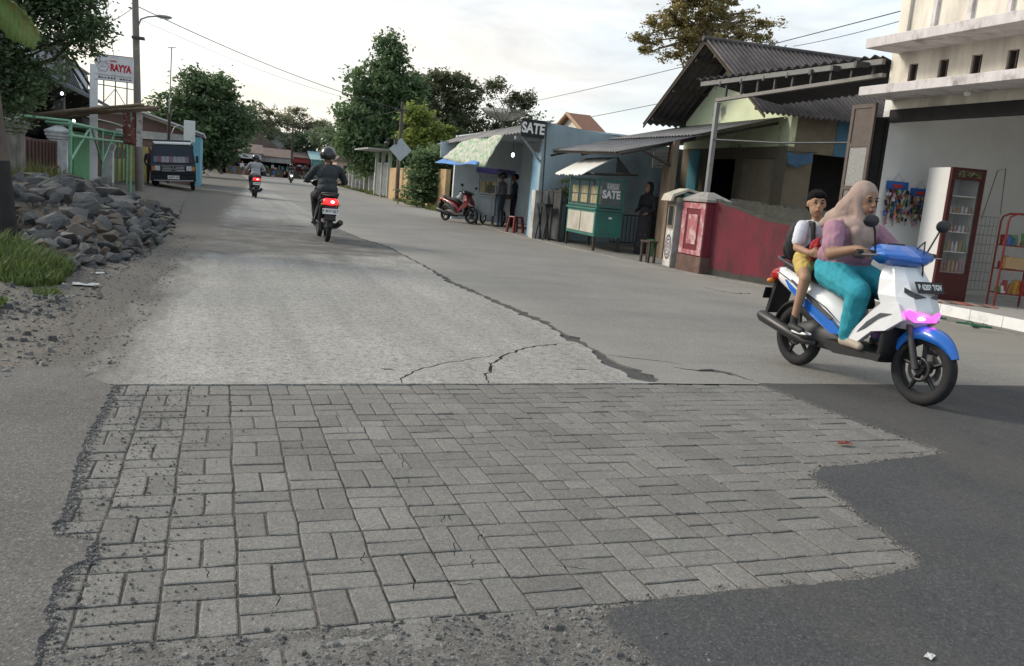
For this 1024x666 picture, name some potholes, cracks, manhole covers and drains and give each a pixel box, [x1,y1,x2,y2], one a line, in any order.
crack [344,231,755,384]
